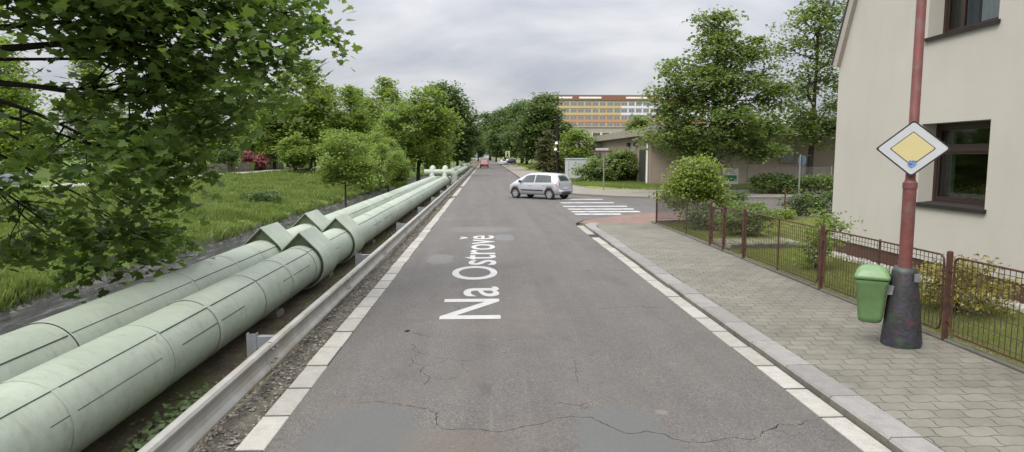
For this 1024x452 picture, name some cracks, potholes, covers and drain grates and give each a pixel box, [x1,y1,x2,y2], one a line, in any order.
crack [406,333,473,383]
crack [363,401,809,443]
